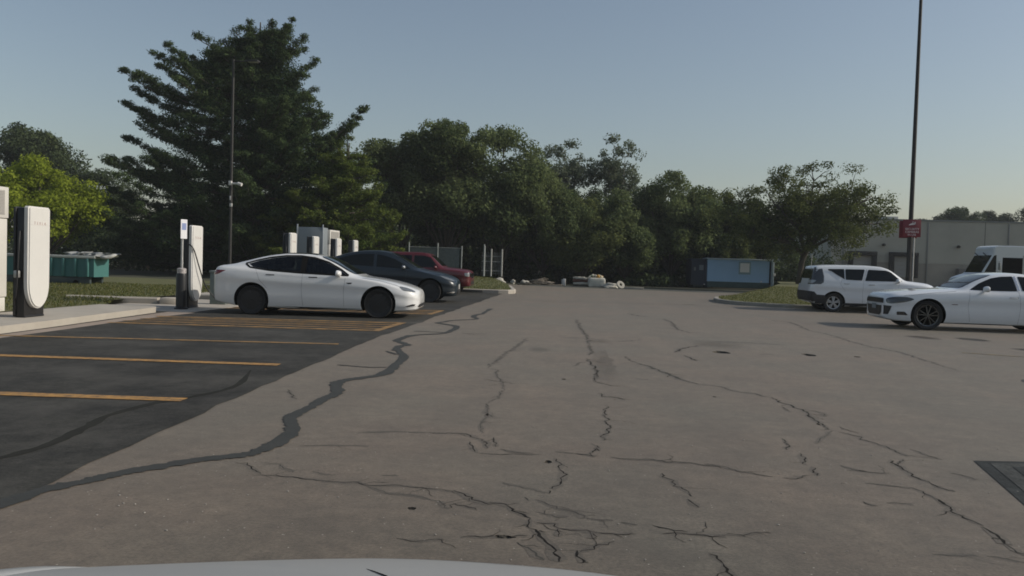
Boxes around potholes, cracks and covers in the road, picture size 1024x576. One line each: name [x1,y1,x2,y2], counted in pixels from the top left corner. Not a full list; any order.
crack [235,314,1024,576]
